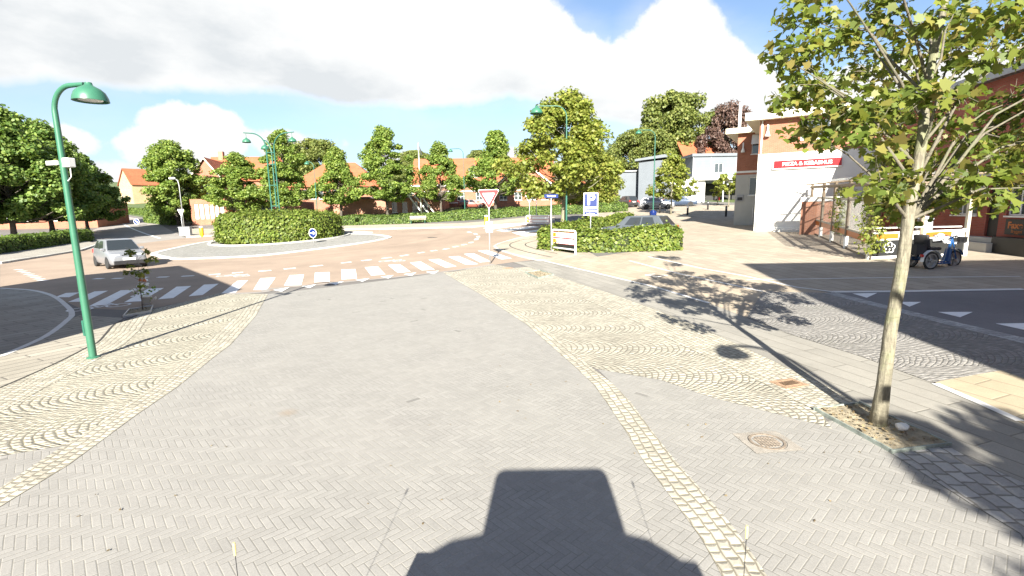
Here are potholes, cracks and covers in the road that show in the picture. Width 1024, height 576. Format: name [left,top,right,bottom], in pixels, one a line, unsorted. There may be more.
manhole cover [732,431,804,453]
